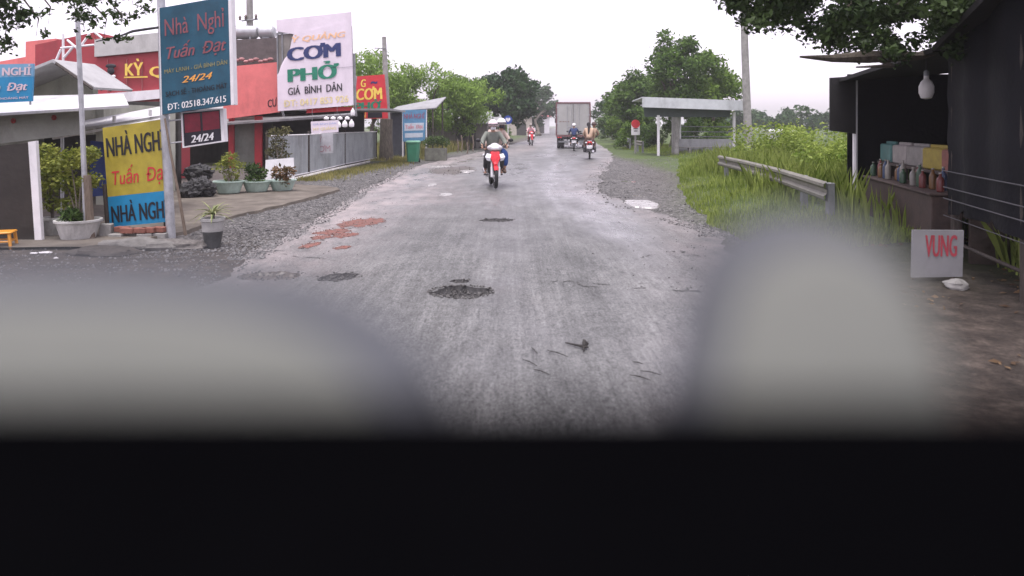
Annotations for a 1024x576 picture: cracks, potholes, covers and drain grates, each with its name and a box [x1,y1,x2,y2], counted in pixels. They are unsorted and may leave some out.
pothole [427,284,495,299]
pothole [317,271,363,282]
crack [545,280,690,291]
